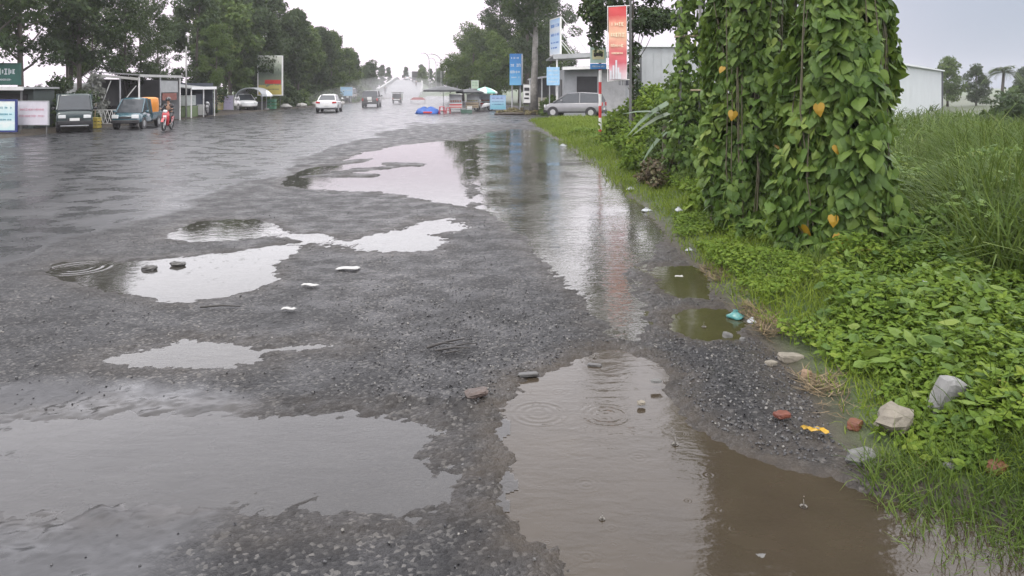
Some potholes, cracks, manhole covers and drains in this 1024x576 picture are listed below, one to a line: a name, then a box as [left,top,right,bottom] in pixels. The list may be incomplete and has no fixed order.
pothole [273,139,489,209]
pothole [0,391,510,550]
pothole [154,217,296,243]
pothole [272,214,474,259]
pothole [478,339,1024,576]
pothole [29,240,319,308]
pothole [58,328,377,378]
